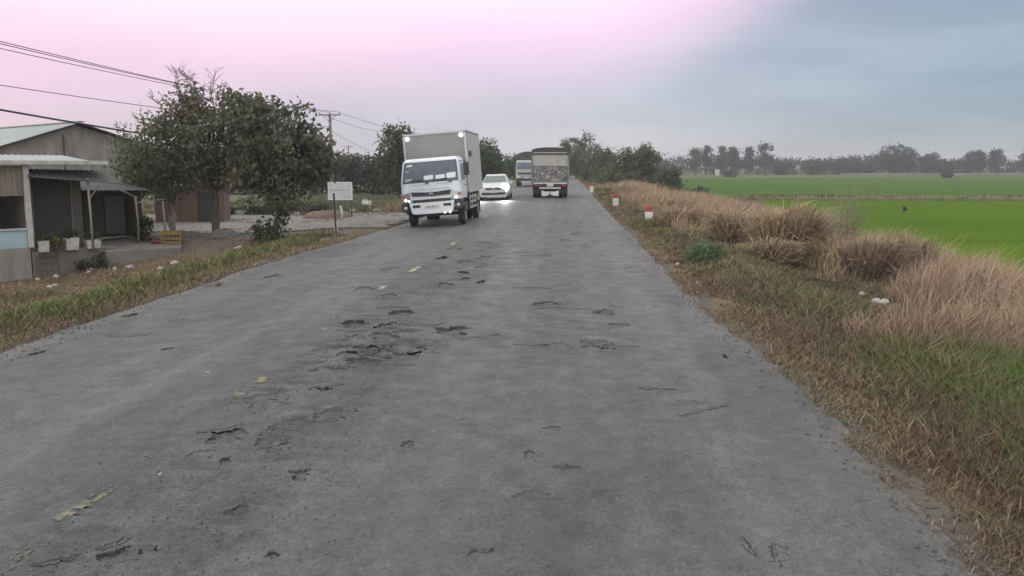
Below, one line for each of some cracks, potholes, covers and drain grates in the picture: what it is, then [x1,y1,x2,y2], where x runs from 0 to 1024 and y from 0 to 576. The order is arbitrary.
pothole [384,309,419,318]
pothole [402,347,431,358]
pothole [279,465,324,487]
pothole [429,325,475,339]
pothole [82,539,156,568]
pothole [336,319,380,329]
pothole [588,308,620,317]
pothole [196,425,259,448]
pothole [376,339,432,356]
crack [741,536,783,567]
pothole [528,300,569,308]
pothole [212,502,261,522]
